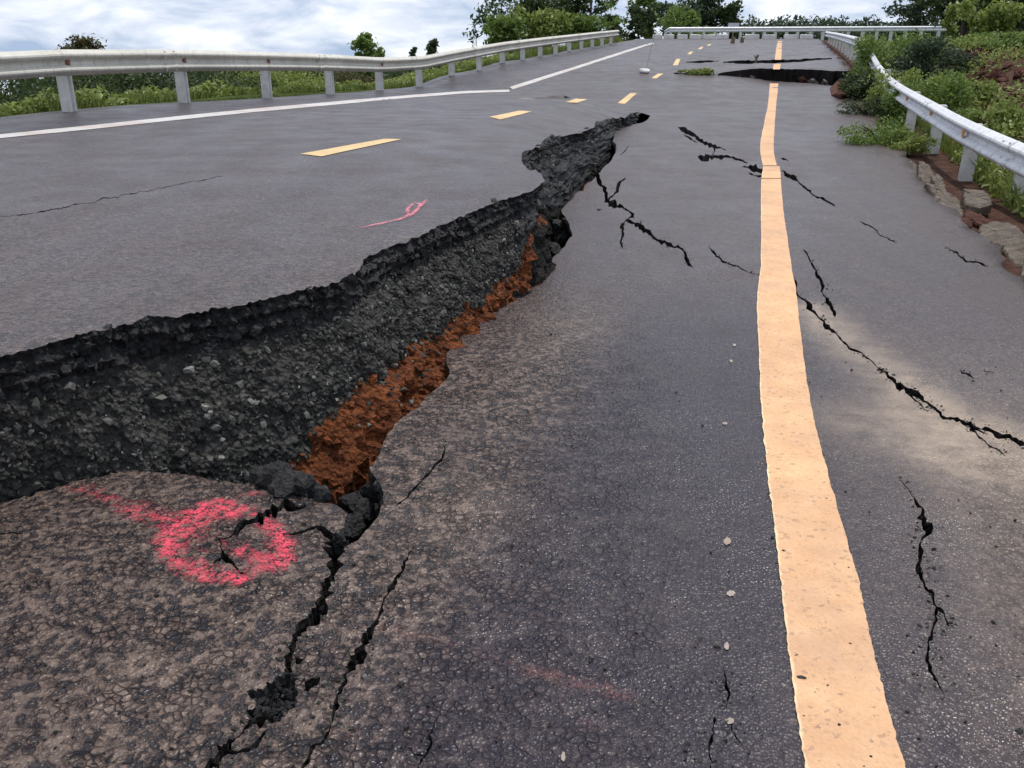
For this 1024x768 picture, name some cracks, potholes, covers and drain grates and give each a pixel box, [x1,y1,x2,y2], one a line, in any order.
crack [900,480,949,696]
crack [0,96,895,768]
crack [794,250,1024,455]
